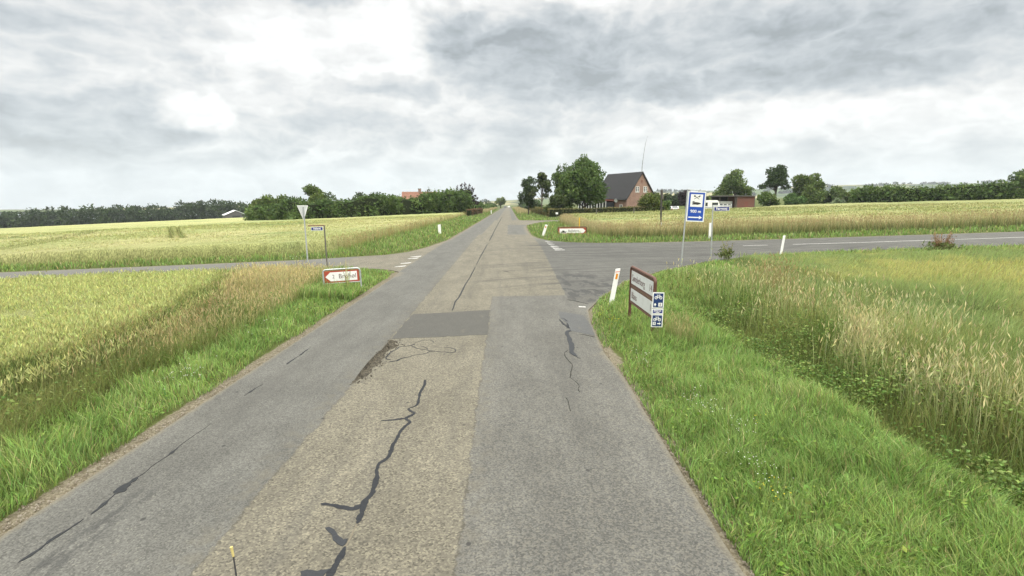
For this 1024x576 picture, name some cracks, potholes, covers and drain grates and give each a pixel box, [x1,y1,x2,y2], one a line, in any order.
pothole [350,339,401,385]
